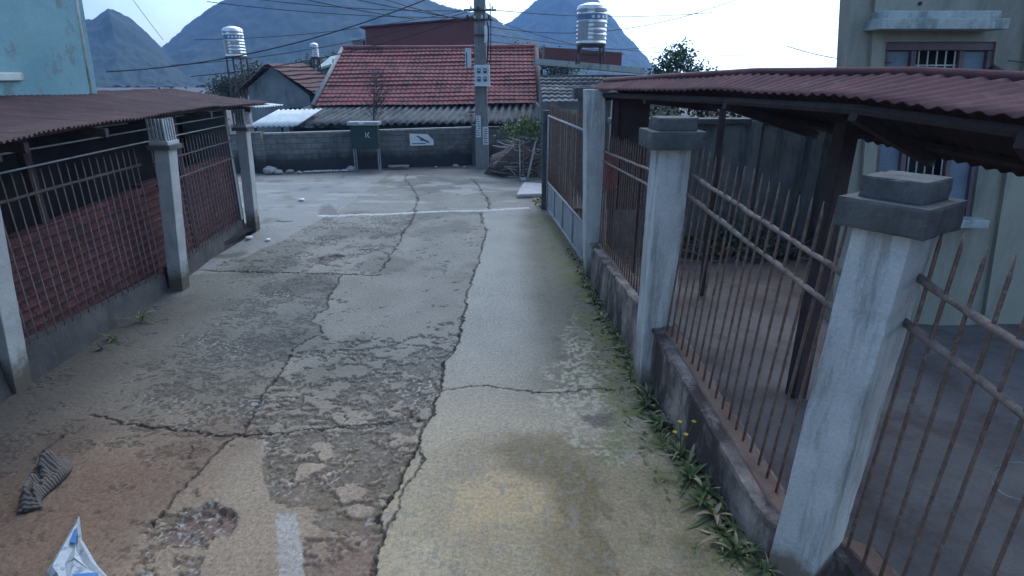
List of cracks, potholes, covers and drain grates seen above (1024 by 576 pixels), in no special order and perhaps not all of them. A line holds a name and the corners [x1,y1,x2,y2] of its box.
crack [88,173,616,576]
pothole [170,499,241,549]
